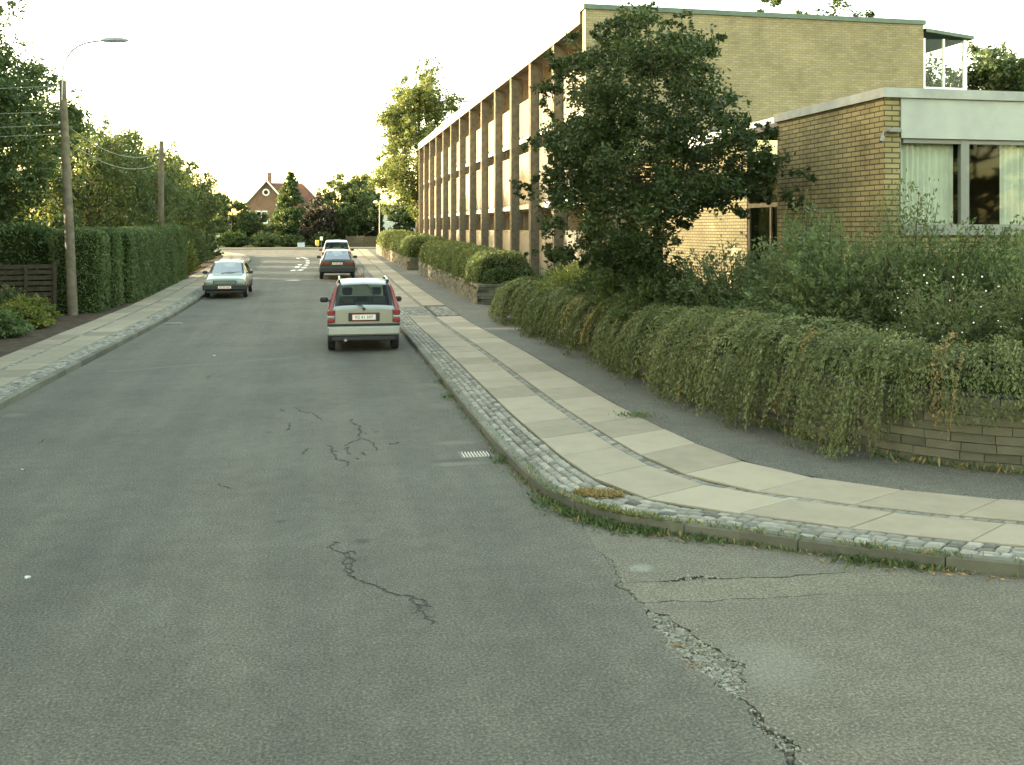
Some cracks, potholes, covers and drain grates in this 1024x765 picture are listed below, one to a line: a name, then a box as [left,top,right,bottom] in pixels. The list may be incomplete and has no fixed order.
drain grate [458,450,495,458]
crack [326,542,435,625]
crack [327,419,399,468]
